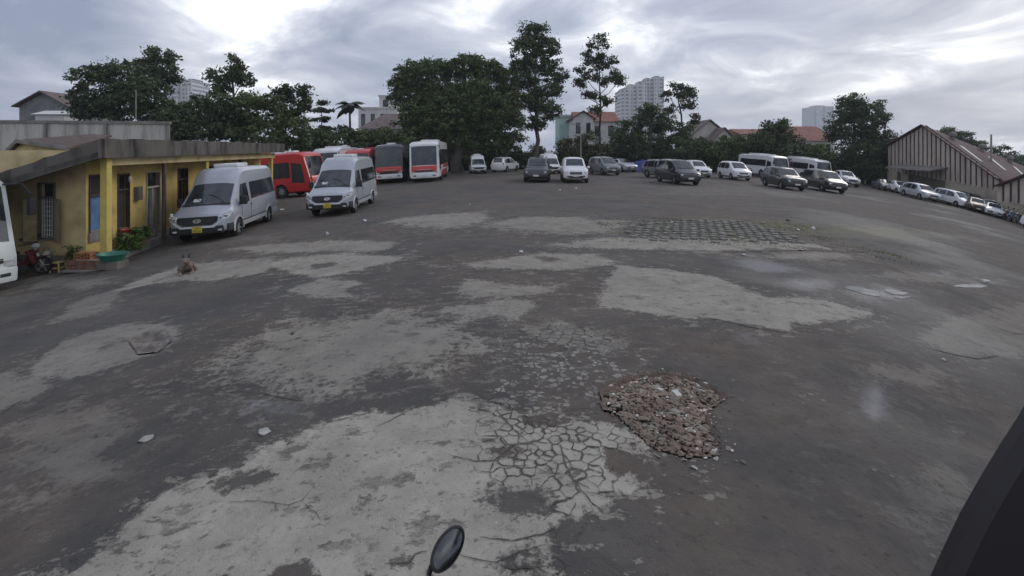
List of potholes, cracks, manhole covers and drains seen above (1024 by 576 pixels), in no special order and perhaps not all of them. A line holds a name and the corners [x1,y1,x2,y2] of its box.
pothole [599,372,728,460]
crack [453,399,644,576]
crack [938,350,995,359]
crack [514,320,625,351]
crack [233,491,321,520]
crack [259,392,304,401]
